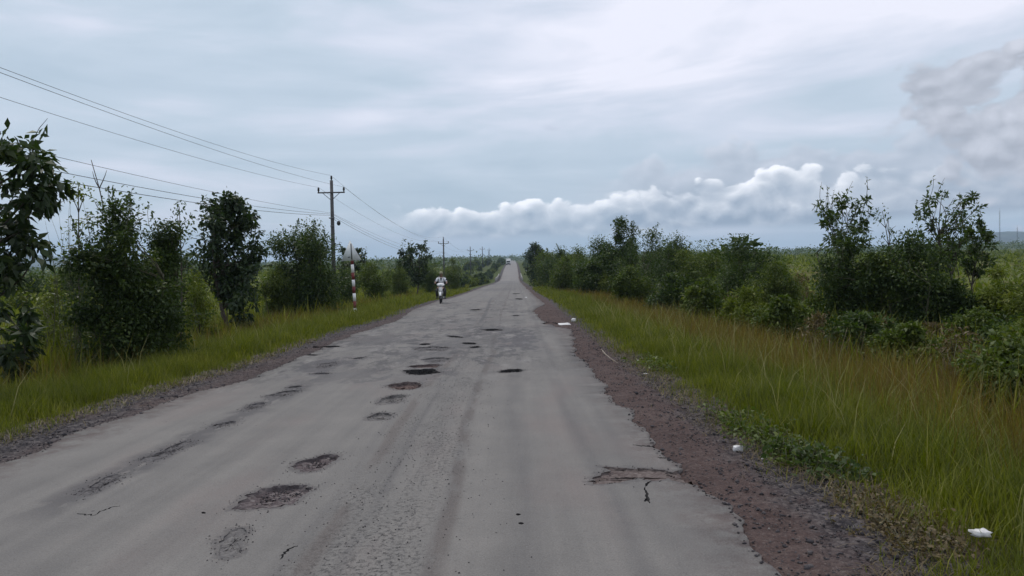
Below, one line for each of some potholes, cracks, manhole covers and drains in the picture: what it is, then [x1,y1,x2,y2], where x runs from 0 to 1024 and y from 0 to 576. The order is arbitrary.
pothole [291,454,340,472]
pothole [80,474,122,495]
pothole [232,485,313,510]
pothole [588,467,693,485]
pothole [218,528,247,558]
pothole [140,441,194,462]
pothole [377,395,406,404]
pothole [388,382,422,390]
